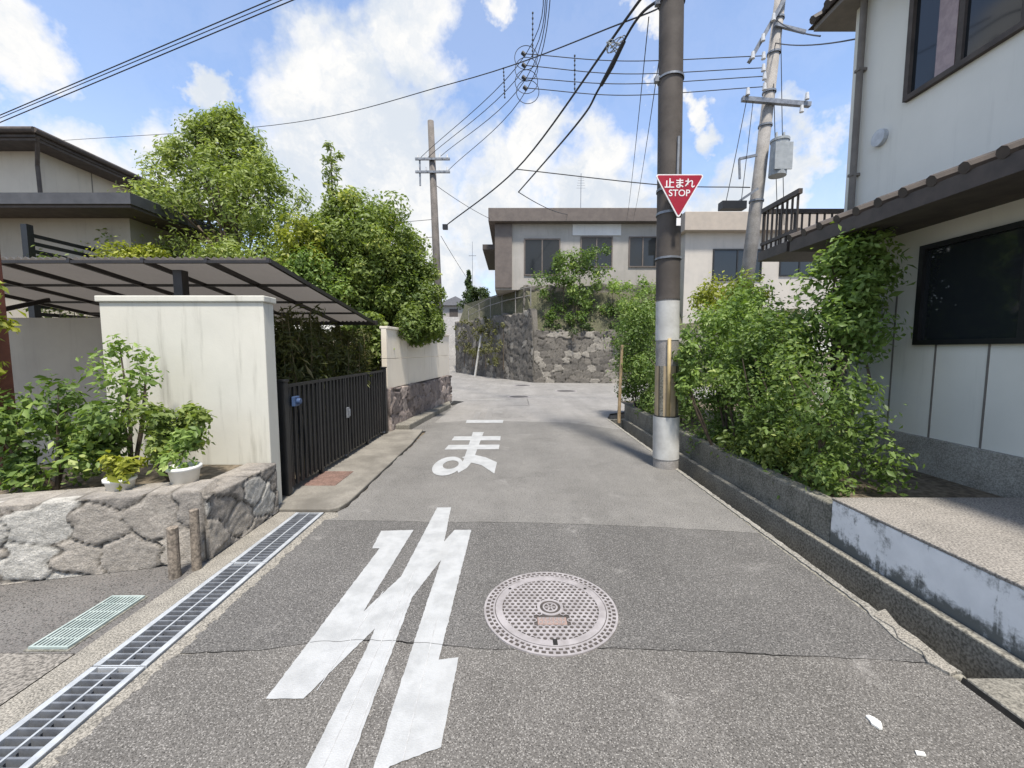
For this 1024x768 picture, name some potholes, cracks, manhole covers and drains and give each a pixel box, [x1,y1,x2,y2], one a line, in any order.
drain grate [23,595,149,652]
manhole cover [484,572,618,657]
crack [180,639,926,664]
drain grate [0,667,145,768]
drain grate [231,512,324,564]
drain grate [93,562,266,670]
